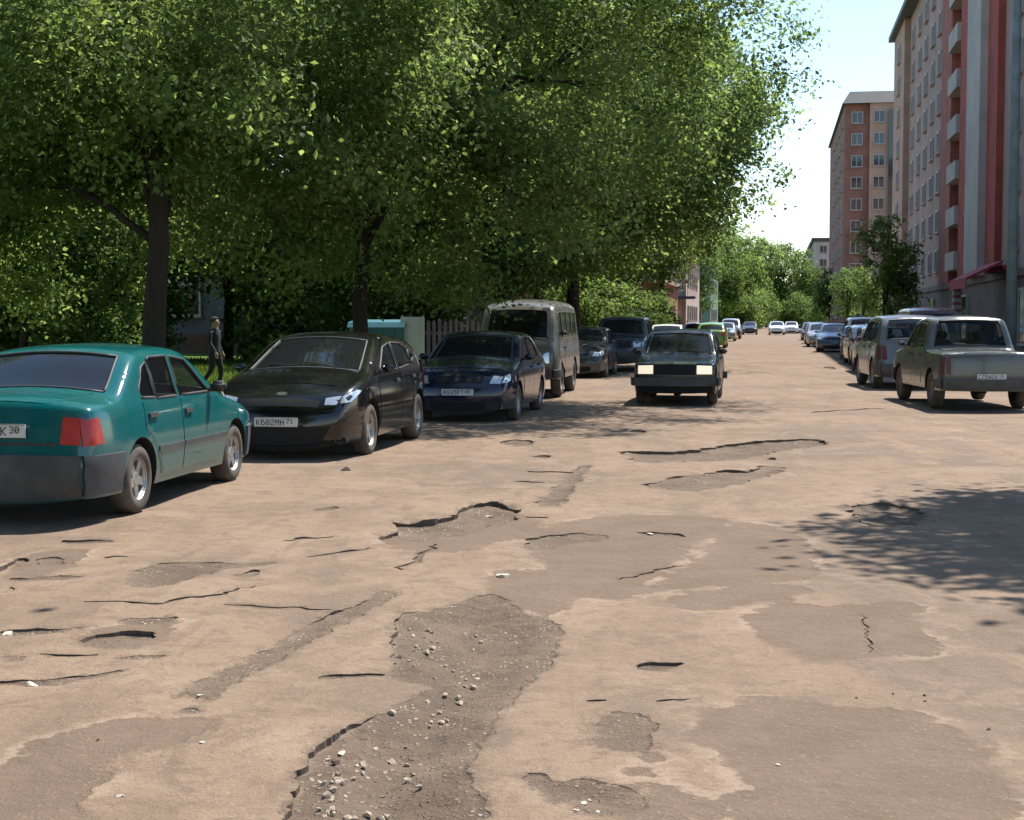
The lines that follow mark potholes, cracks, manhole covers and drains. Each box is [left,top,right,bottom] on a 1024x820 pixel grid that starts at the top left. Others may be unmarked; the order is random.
pothole [620,439,828,463]
pothole [636,662,684,671]
pothole [522,773,649,818]
crack [84,586,331,610]
pothole [282,594,565,820]
pothole [642,466,786,492]
pothole [170,592,398,702]
pothole [846,503,928,527]
pothole [126,562,275,587]
pothole [80,630,157,647]
pothole [35,557,66,565]
pothole [586,711,660,752]
